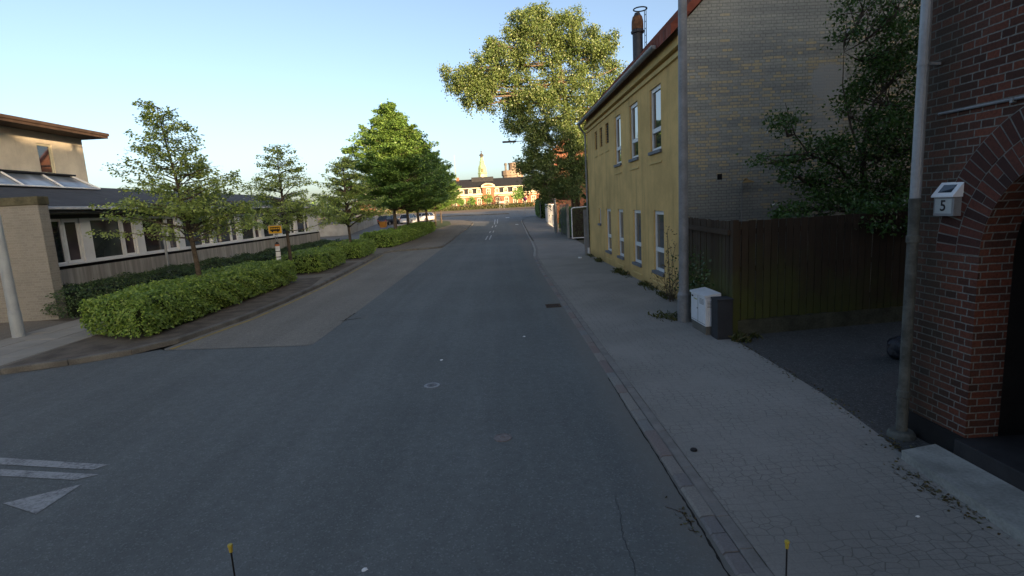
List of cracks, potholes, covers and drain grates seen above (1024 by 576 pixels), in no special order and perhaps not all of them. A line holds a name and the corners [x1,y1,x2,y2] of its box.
crack [608,378,730,576]
manhole cover [494,433,512,442]
